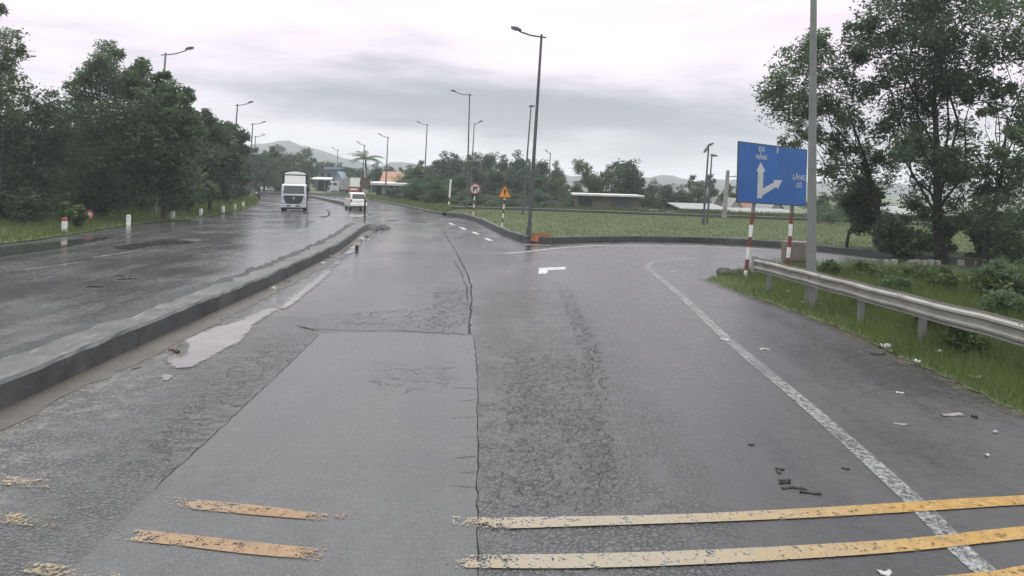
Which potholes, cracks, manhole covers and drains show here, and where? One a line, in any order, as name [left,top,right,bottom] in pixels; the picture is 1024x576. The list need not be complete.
crack [372,362,458,394]
crack [479,295,619,513]
crack [297,282,472,334]
